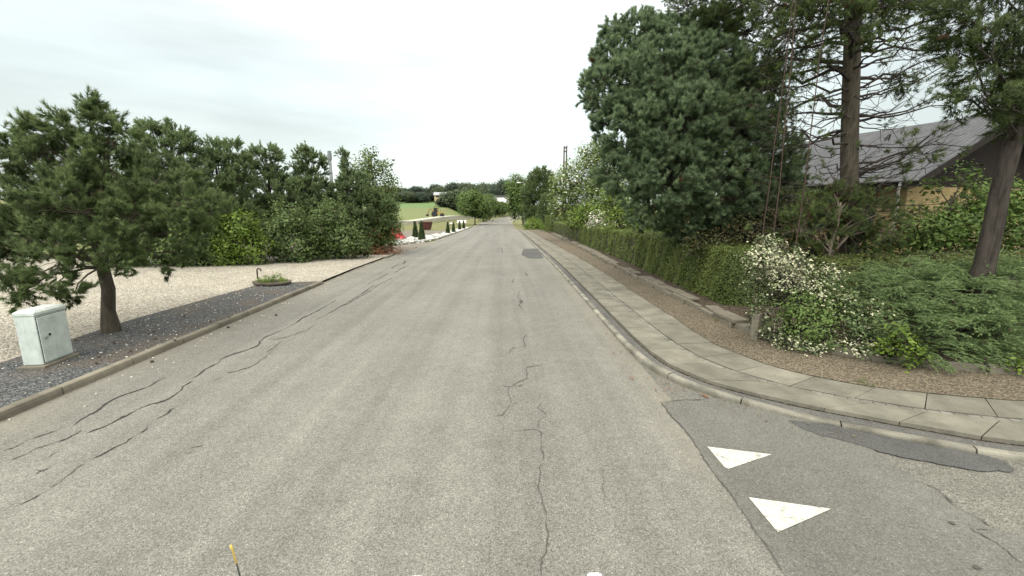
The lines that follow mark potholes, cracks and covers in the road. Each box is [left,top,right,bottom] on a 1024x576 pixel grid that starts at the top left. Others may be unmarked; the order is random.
crack [4,261,409,504]
crack [924,482,1023,565]
crack [496,364,549,571]
